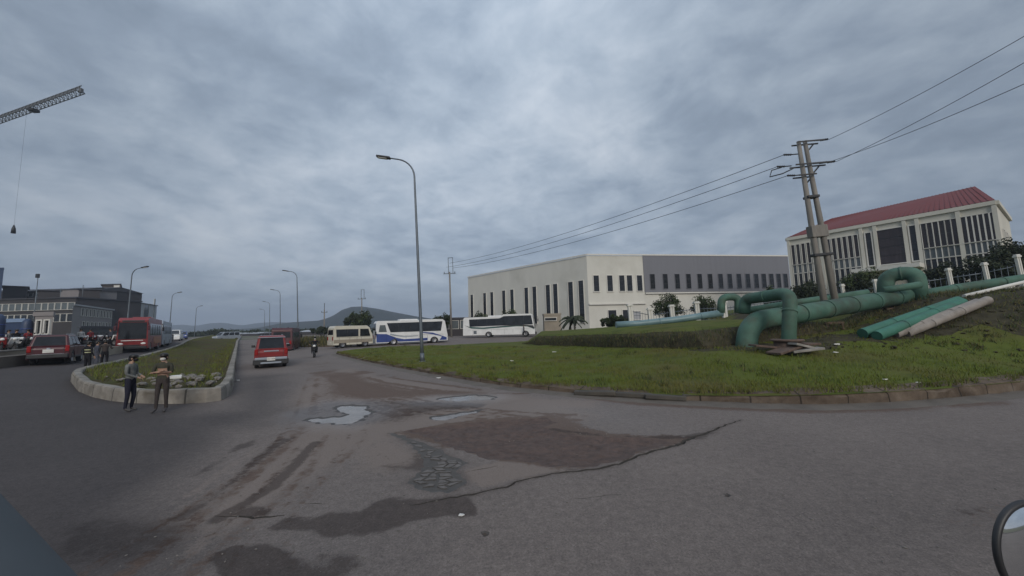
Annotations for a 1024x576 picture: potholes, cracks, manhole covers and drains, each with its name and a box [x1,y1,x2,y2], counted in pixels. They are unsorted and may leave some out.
pothole [436,394,498,402]
crack [389,420,740,506]
pothole [429,409,484,421]
pothole [302,404,376,425]
